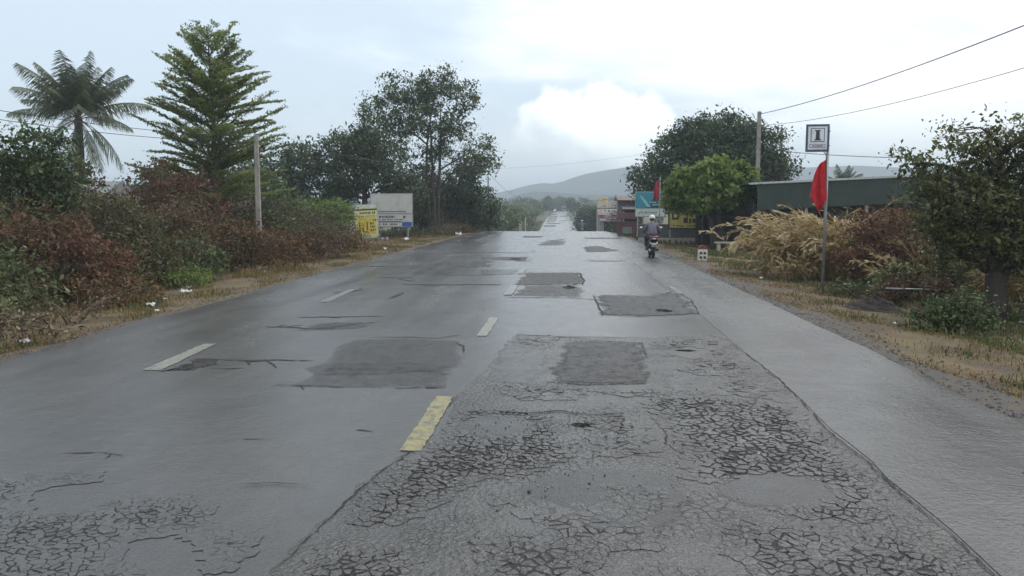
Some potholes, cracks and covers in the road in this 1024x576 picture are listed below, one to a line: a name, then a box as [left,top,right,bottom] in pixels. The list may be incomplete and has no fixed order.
crack [0,338,976,576]
crack [504,335,576,349]
